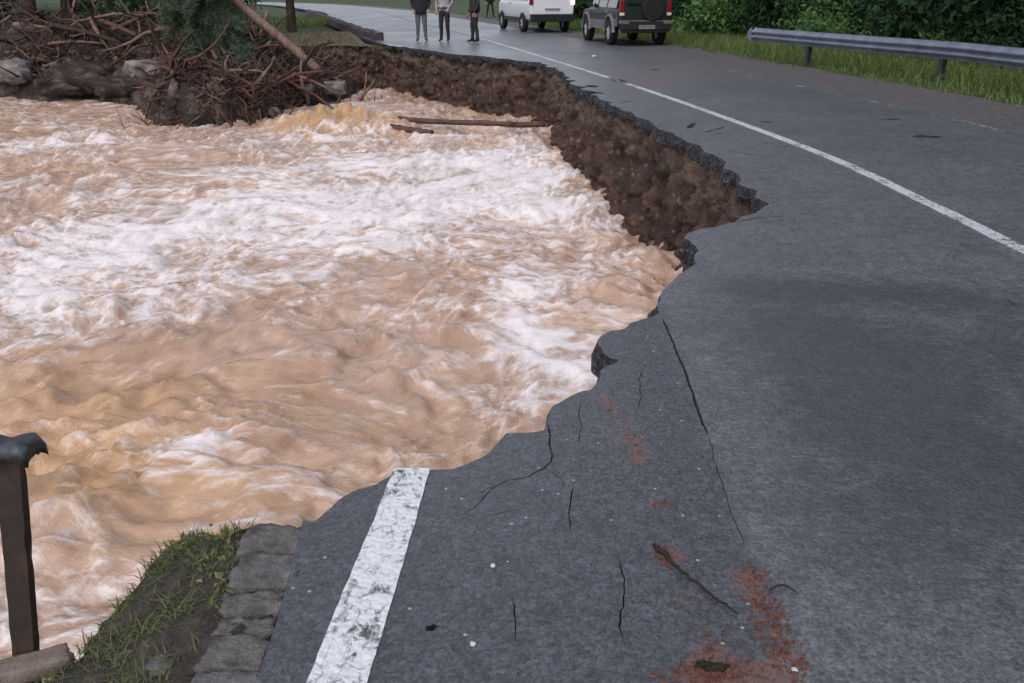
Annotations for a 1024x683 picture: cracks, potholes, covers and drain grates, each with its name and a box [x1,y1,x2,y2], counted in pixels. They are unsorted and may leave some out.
crack [462,443,573,533]
